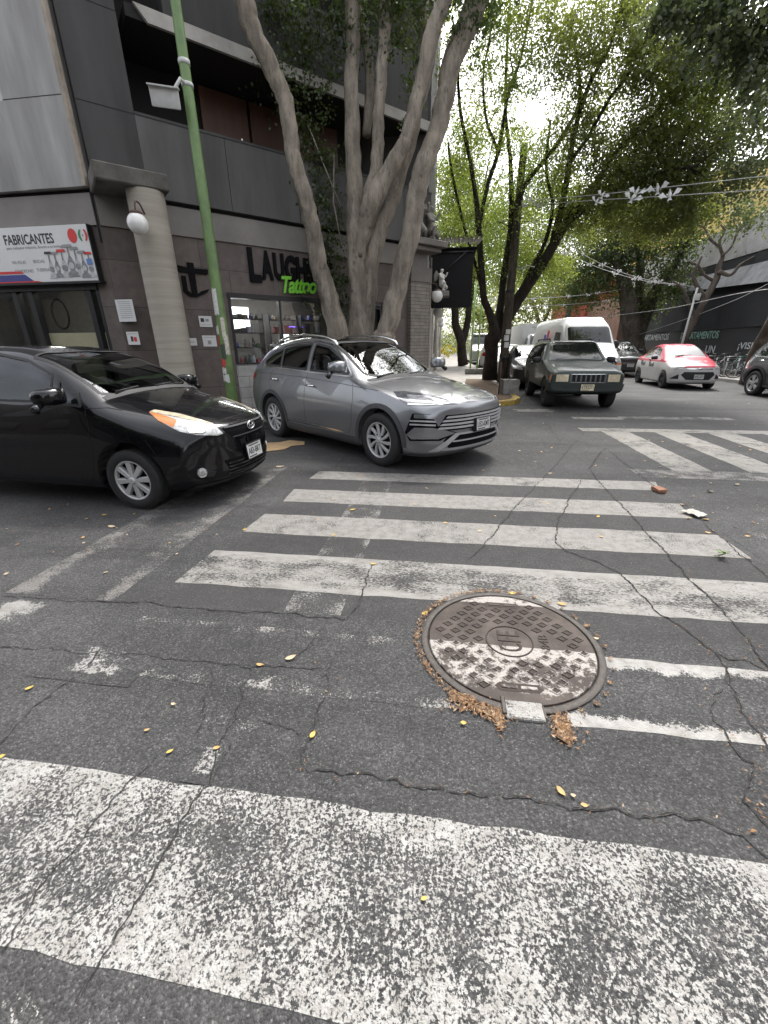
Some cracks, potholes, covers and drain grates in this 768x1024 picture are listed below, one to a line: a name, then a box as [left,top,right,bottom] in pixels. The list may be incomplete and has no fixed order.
manhole cover [421,593,607,724]
crack [0,424,768,858]
crack [1,759,153,950]
